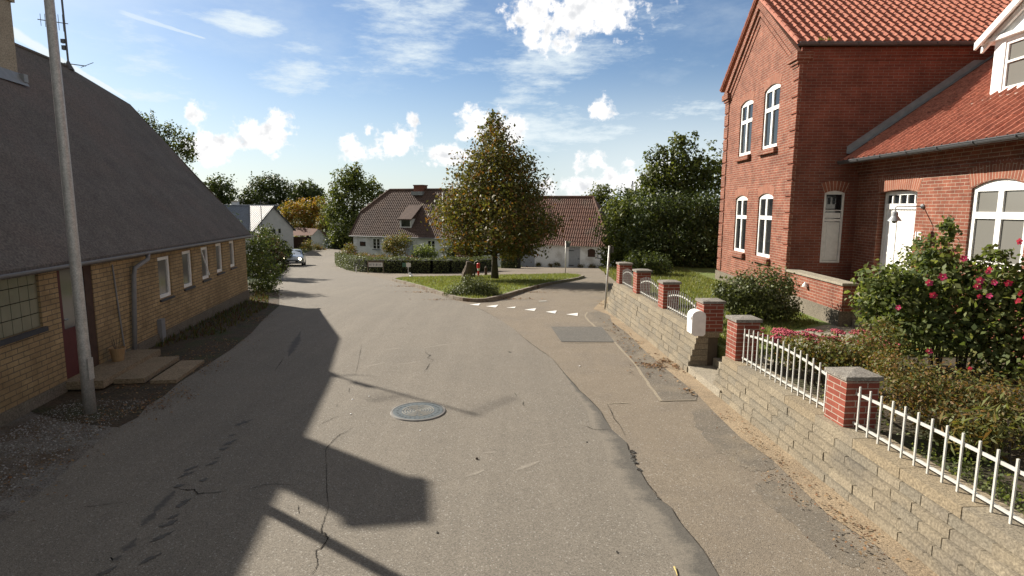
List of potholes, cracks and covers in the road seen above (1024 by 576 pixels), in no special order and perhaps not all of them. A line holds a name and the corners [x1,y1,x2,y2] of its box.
crack [310,467,329,575]
manhole cover [390,402,446,422]
